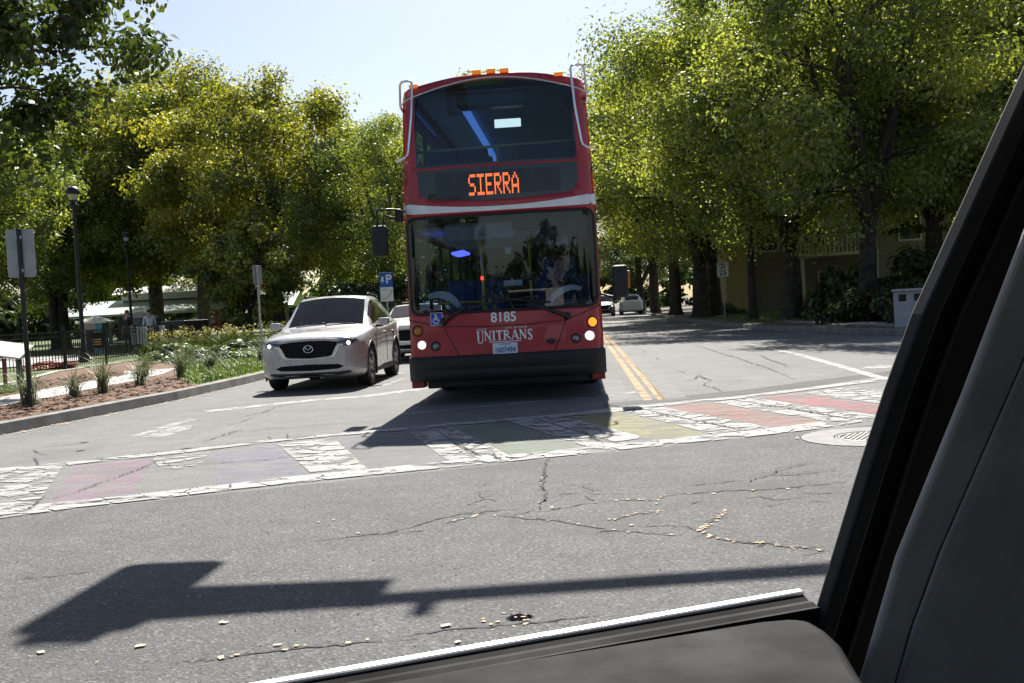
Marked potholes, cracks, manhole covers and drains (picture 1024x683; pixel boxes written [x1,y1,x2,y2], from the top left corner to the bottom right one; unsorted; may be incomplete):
crack [315,458,849,555]
pothole [506,612,534,622]
manhole cover [801,427,871,447]
